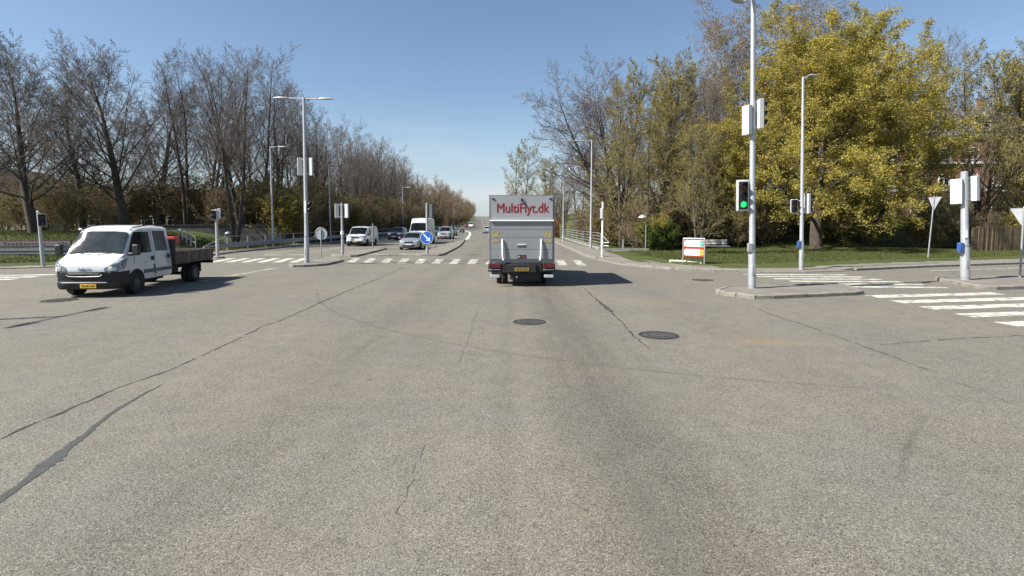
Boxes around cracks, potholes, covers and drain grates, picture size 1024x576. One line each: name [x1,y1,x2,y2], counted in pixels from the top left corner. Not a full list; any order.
manhole cover [632,330,686,341]
crack [458,307,480,362]
crack [395,444,425,513]
crack [583,287,650,349]
crack [760,309,1024,371]
manhole cover [509,318,550,326]
